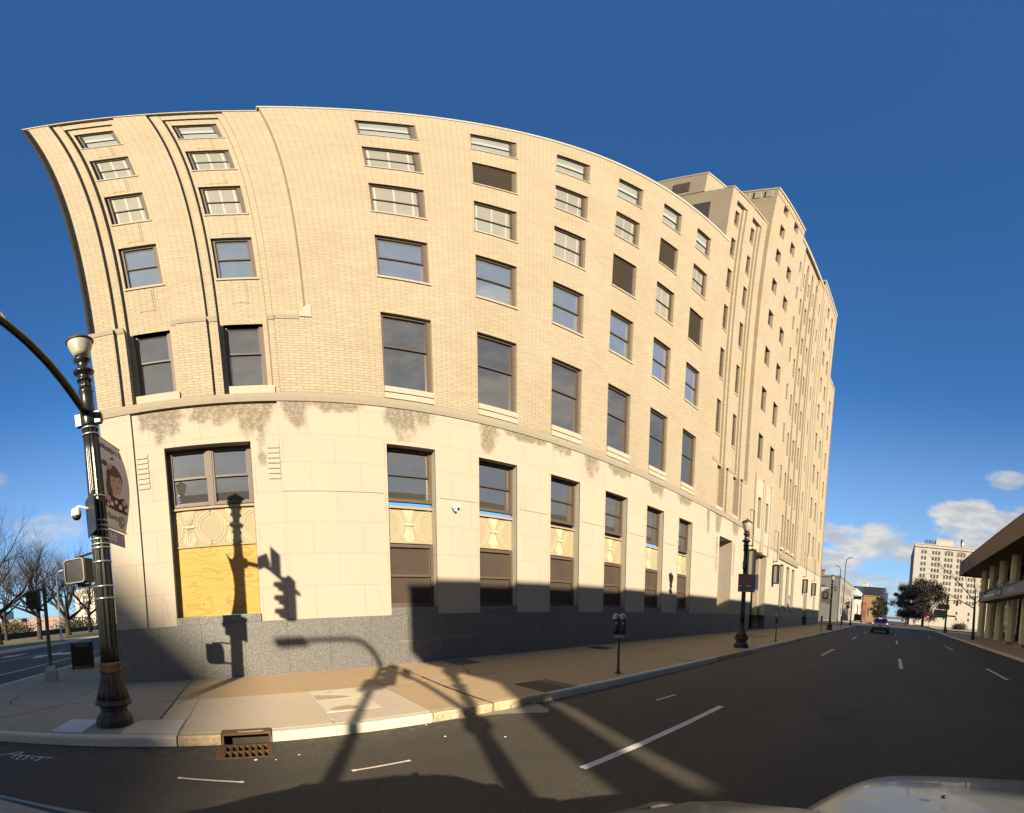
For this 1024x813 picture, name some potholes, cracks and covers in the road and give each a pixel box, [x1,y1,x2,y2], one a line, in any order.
drain grate [215,727,273,760]
